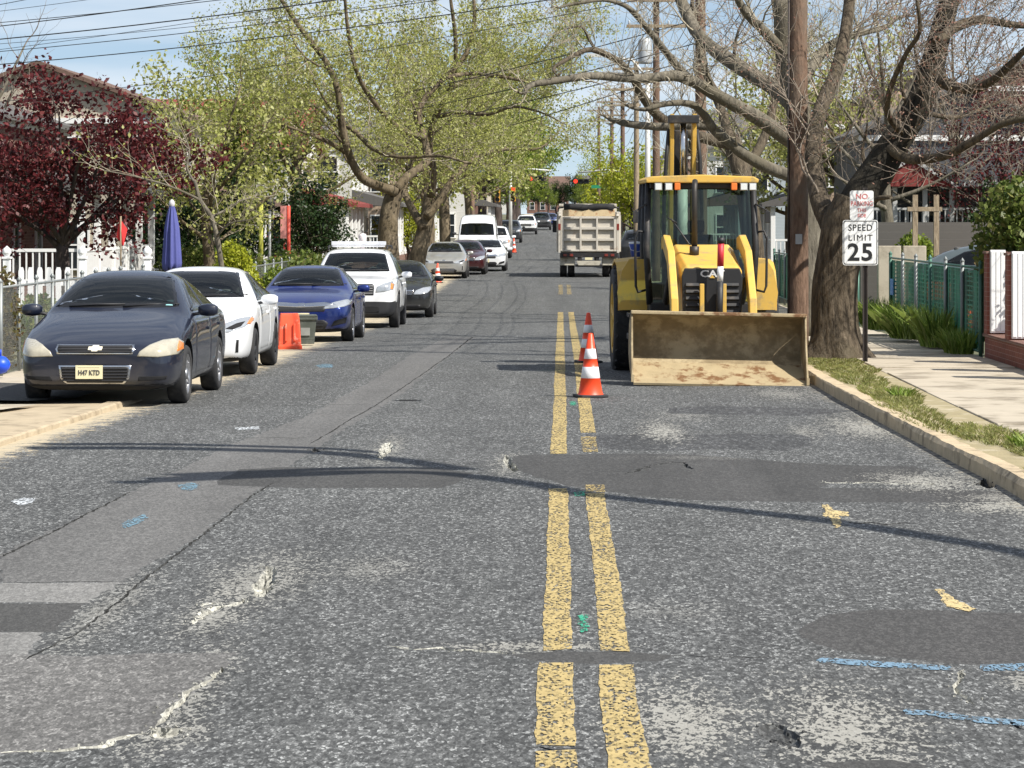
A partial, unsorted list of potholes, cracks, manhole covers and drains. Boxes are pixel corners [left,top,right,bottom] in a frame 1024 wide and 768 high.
pothole [749,723,806,749]
crack [0,483,272,753]
crack [948,669,983,704]
pothole [501,454,519,473]
crack [625,462,694,474]
